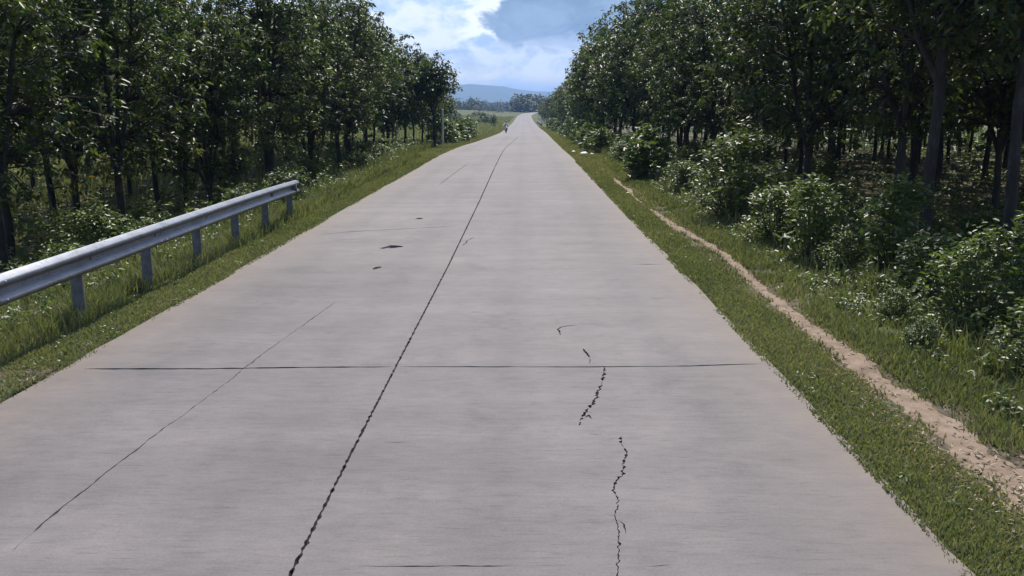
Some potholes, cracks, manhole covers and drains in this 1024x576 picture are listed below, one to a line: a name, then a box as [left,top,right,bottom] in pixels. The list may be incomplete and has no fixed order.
crack [579,349,606,425]
crack [611,436,628,576]
